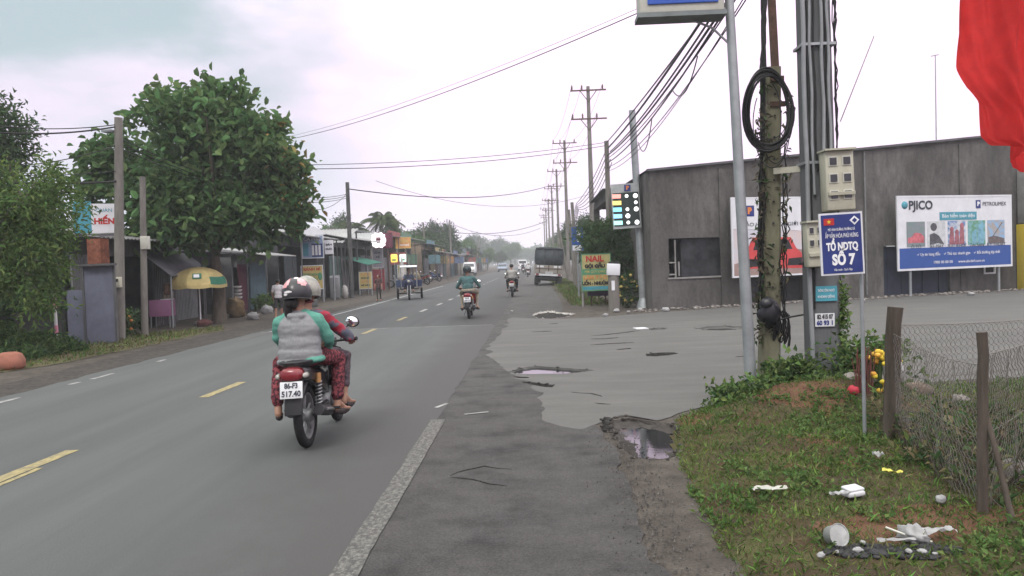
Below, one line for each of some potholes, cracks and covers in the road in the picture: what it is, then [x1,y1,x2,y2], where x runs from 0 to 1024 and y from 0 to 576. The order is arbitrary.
crack [573,392,654,421]
crack [593,330,639,350]
pothole [533,310,574,319]
crack [450,466,505,486]
pothole [510,365,592,374]
pothole [608,414,684,461]
